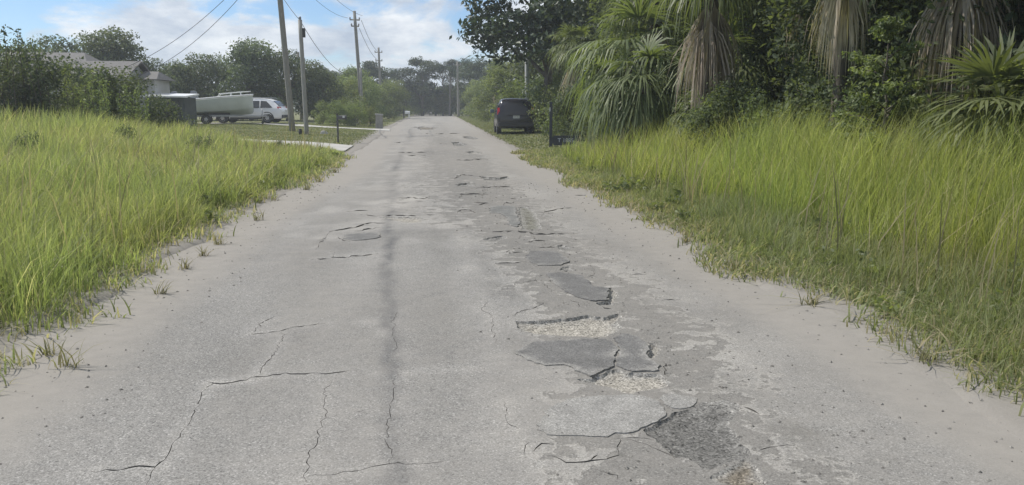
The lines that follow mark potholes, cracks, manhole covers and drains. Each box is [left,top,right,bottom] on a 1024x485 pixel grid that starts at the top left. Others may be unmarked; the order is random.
crack [303,381,443,480]
crack [91,317,350,483]
pothole [596,288,619,305]
crack [505,407,675,480]
pothole [577,369,672,394]
pothole [515,314,624,337]
